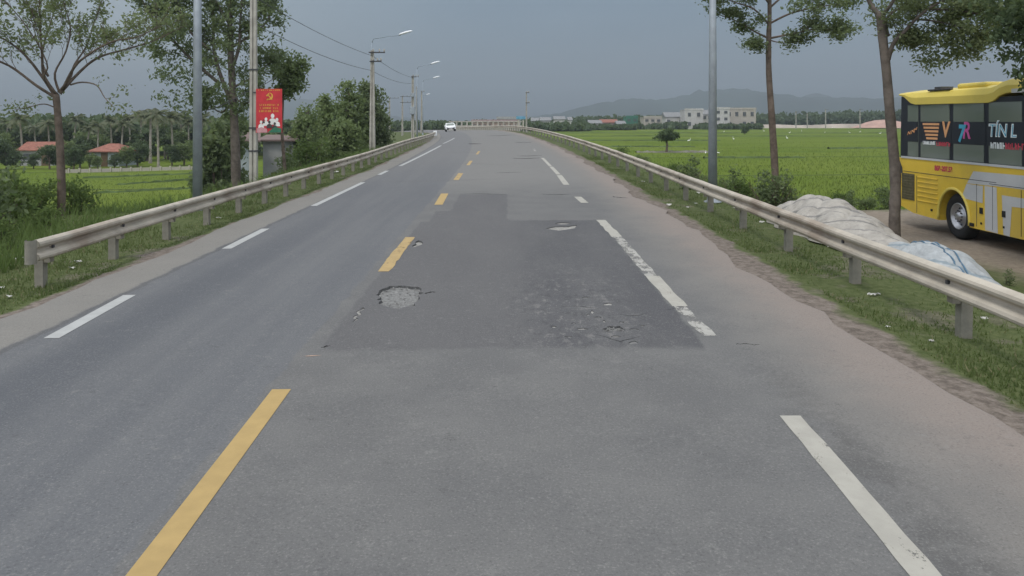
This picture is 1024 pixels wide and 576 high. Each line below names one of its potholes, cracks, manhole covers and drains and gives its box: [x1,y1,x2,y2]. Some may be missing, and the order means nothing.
pothole [377,286,431,308]
pothole [547,222,577,231]
